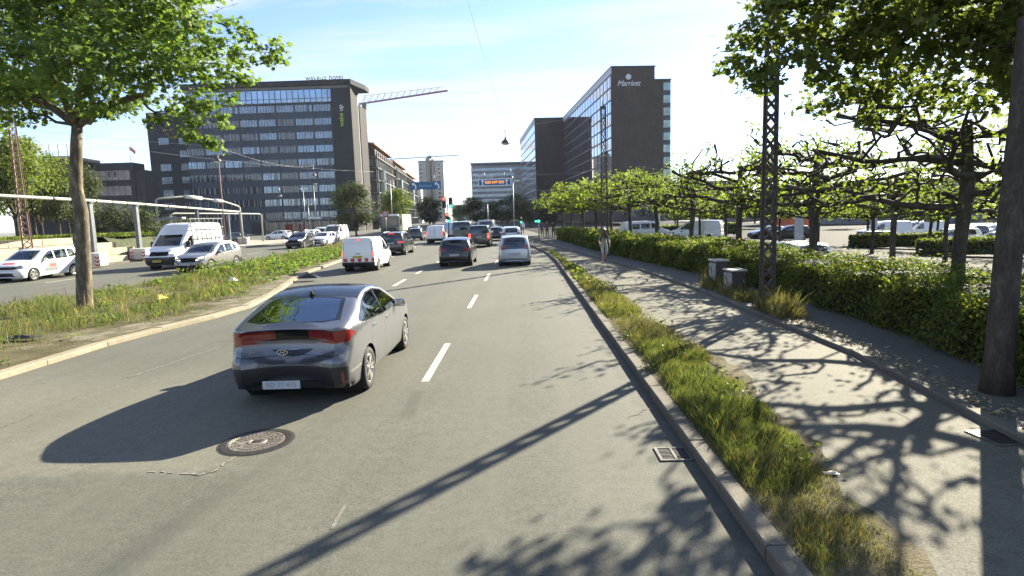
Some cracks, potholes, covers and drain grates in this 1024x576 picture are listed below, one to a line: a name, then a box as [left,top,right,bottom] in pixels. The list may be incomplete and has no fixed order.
drain grate [964,429,1023,447]
drain grate [653,446,695,462]
manhole cover [217,429,295,456]
